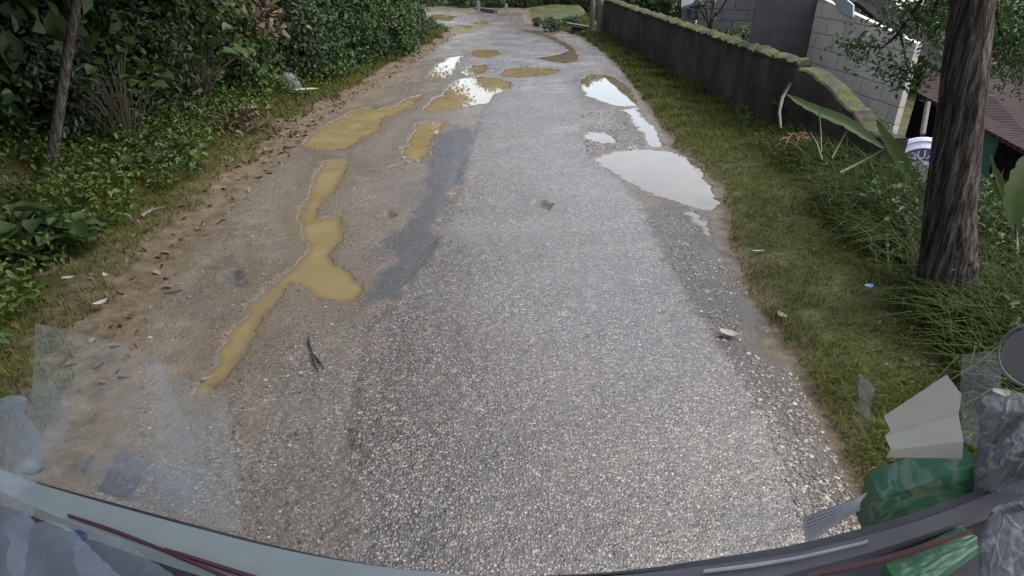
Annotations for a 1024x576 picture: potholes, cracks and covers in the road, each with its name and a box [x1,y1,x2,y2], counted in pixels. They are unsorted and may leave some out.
pothole [498,66,561,78]
pothole [620,107,670,147]
pothole [301,94,424,151]
pothole [183,158,366,402]
pothole [521,28,580,63]
pothole [530,199,555,210]
pothole [582,131,617,144]
pothole [593,146,721,213]
pothole [425,56,464,81]
pothole [399,120,446,162]
pothole [422,75,513,112]
pothole [470,49,501,58]
